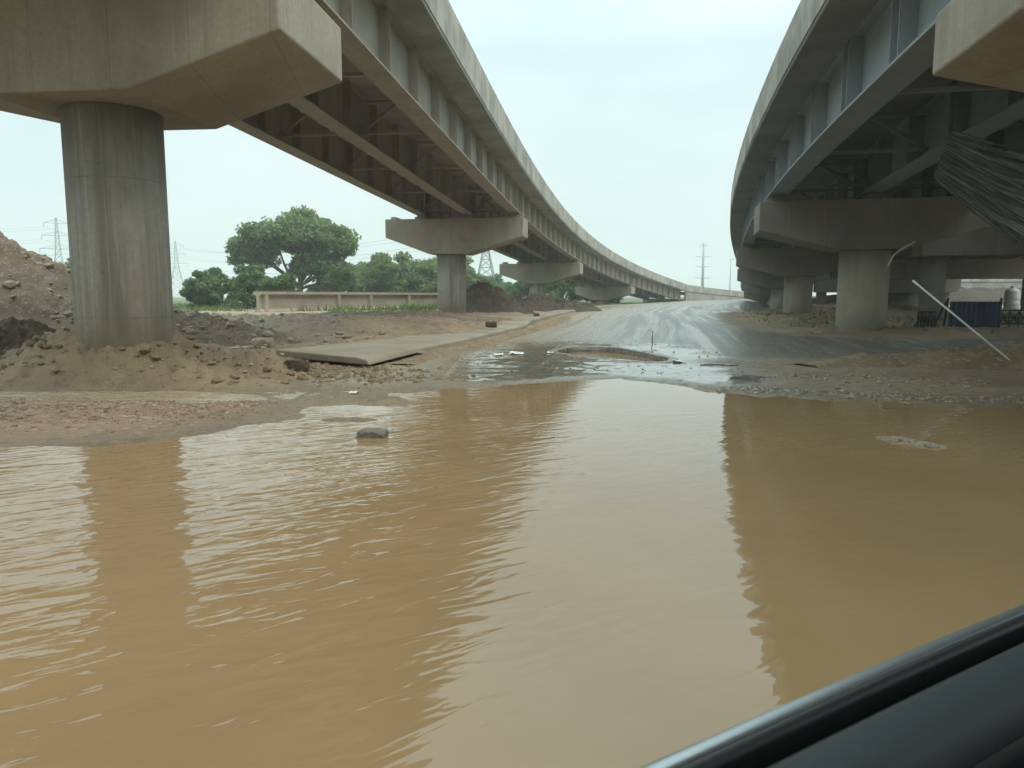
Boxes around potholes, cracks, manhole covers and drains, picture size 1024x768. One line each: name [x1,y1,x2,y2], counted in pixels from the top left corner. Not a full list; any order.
pothole [547,346,679,363]
